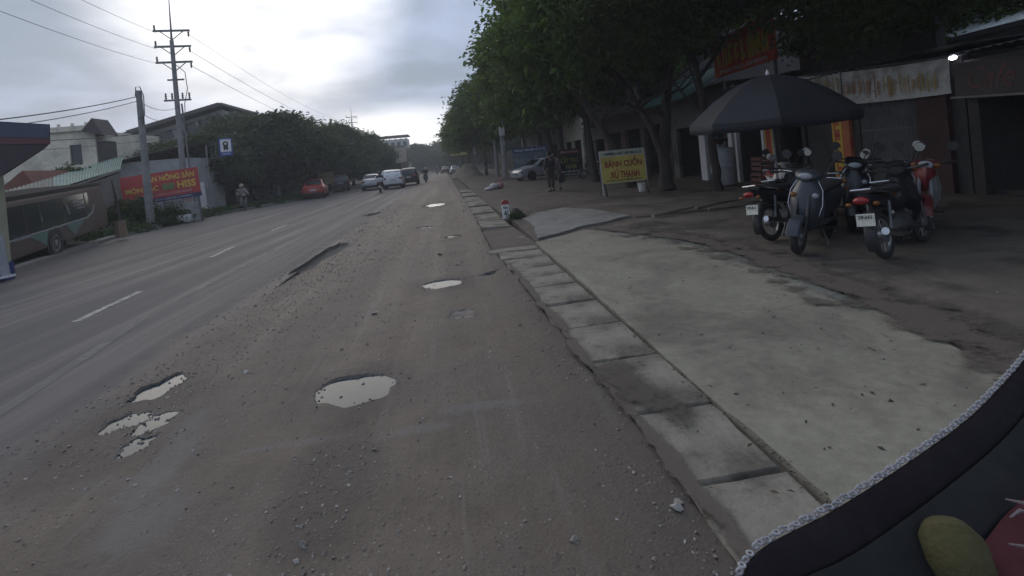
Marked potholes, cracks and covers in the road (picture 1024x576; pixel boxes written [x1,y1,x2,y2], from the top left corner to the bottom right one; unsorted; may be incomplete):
pothole [93,407,160,436]
pothole [302,370,410,408]
pothole [417,277,462,290]
pothole [264,239,356,295]
pothole [120,371,197,407]
pothole [123,408,185,441]
pothole [110,430,165,463]
